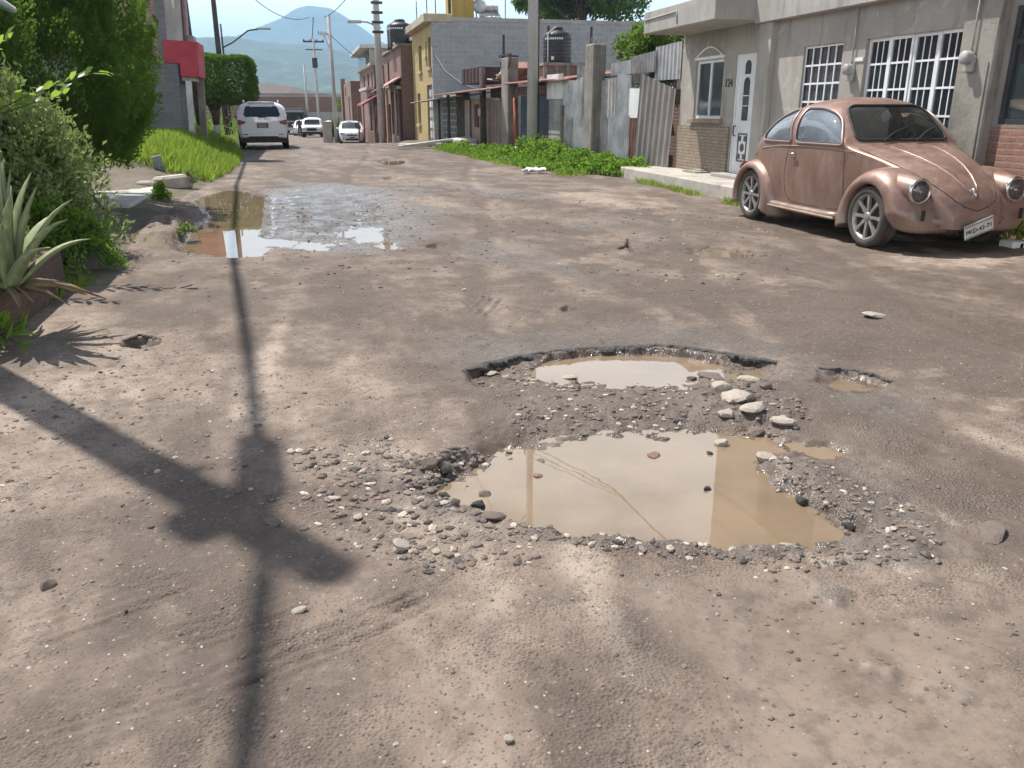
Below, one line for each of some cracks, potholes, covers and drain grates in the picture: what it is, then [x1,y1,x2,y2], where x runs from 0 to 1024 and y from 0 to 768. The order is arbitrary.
pothole [390,399,878,563]
pothole [164,186,420,259]
pothole [376,157,410,165]
pothole [676,244,780,260]
pothole [462,343,794,399]
pothole [118,334,166,350]
pothole [802,366,906,399]
